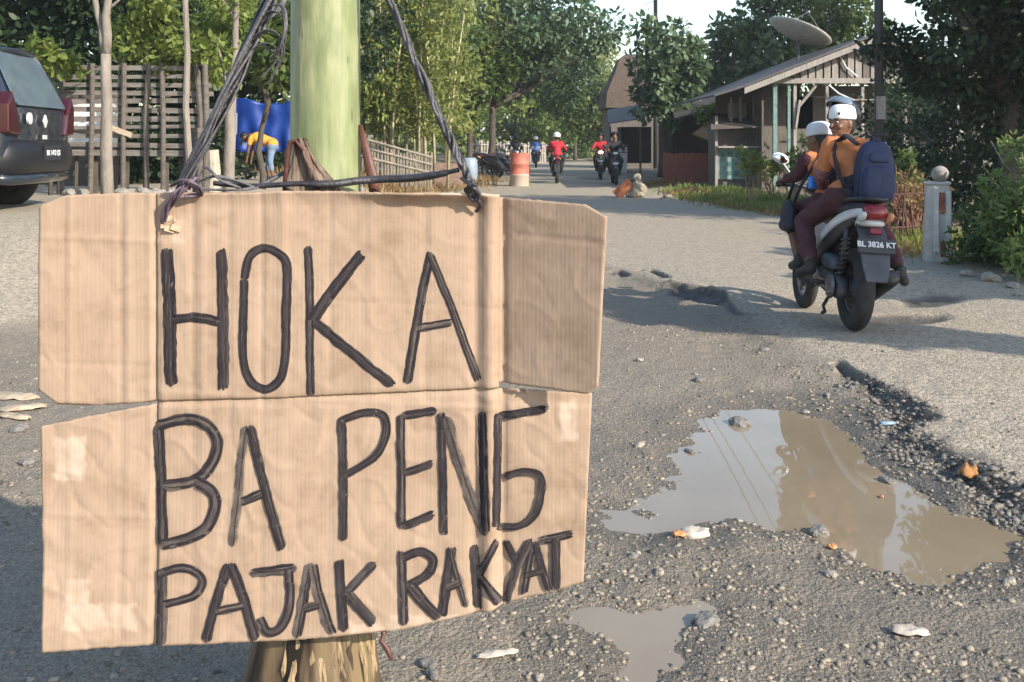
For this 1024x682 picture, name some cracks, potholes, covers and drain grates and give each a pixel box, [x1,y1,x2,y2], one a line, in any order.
pothole [540,585,749,682]
pothole [891,292,972,308]
pothole [586,401,1024,588]
pothole [602,271,738,327]
pothole [845,370,945,436]
